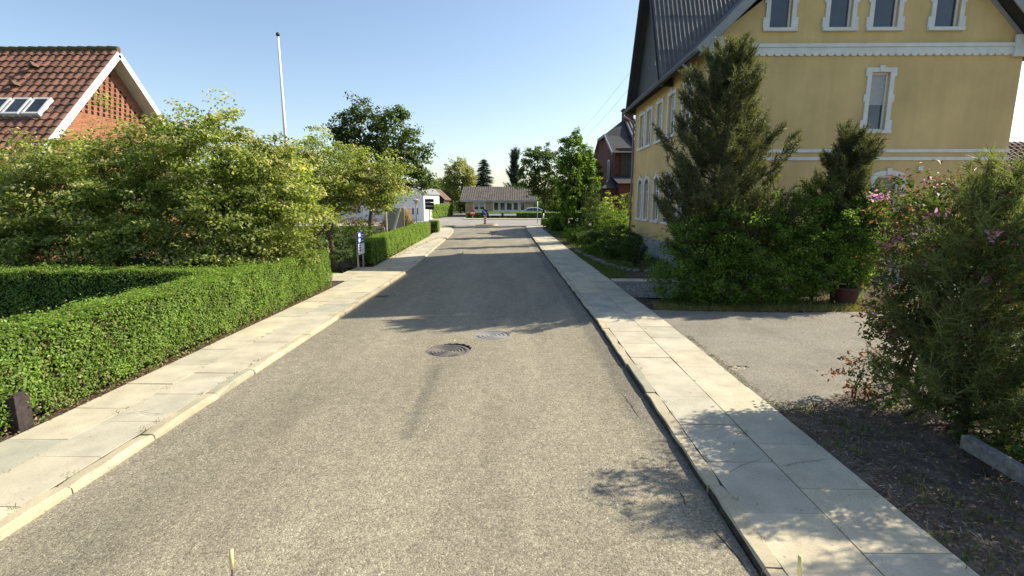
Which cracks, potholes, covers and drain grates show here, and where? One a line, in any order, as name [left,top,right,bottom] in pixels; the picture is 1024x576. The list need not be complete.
manhole cover [473,330,512,340]
manhole cover [425,345,470,357]
